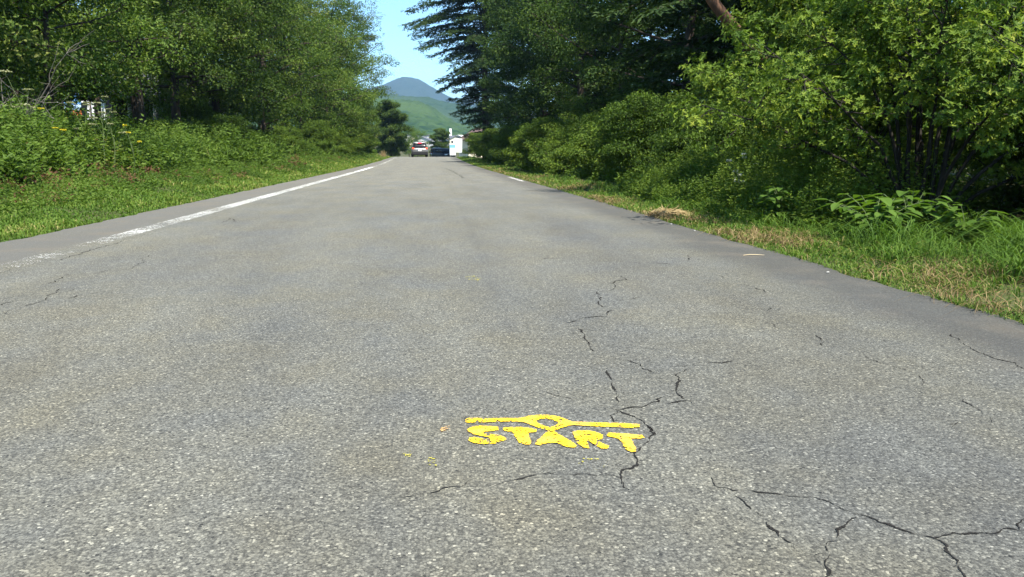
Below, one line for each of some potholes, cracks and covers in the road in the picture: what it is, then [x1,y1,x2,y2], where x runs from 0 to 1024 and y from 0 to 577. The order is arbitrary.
crack [711,477,1024,577]
crack [400,258,733,498]
